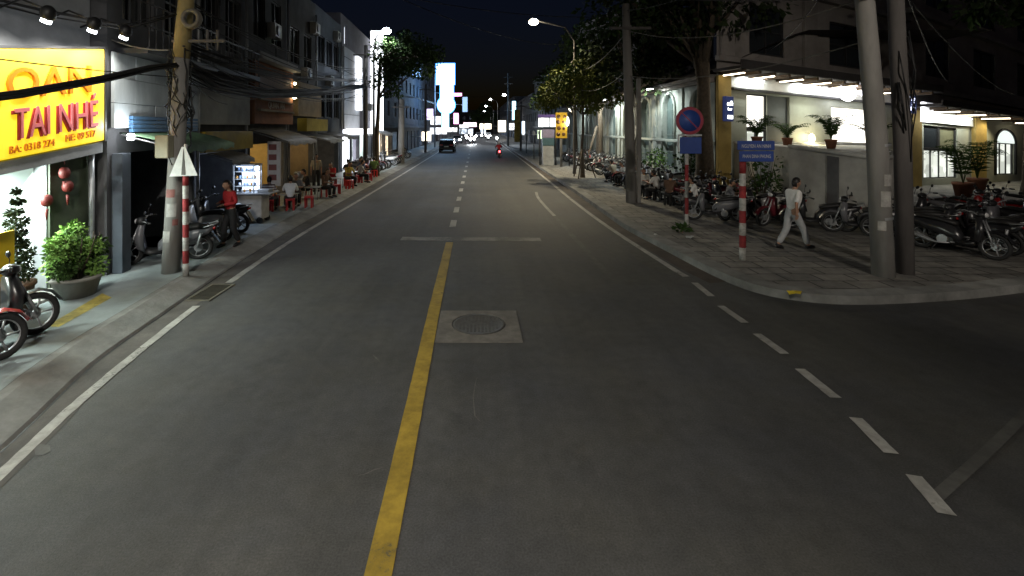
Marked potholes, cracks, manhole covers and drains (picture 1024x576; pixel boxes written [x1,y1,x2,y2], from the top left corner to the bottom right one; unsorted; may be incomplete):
manhole cover [435,311,523,343]
drain grate [184,284,235,301]
